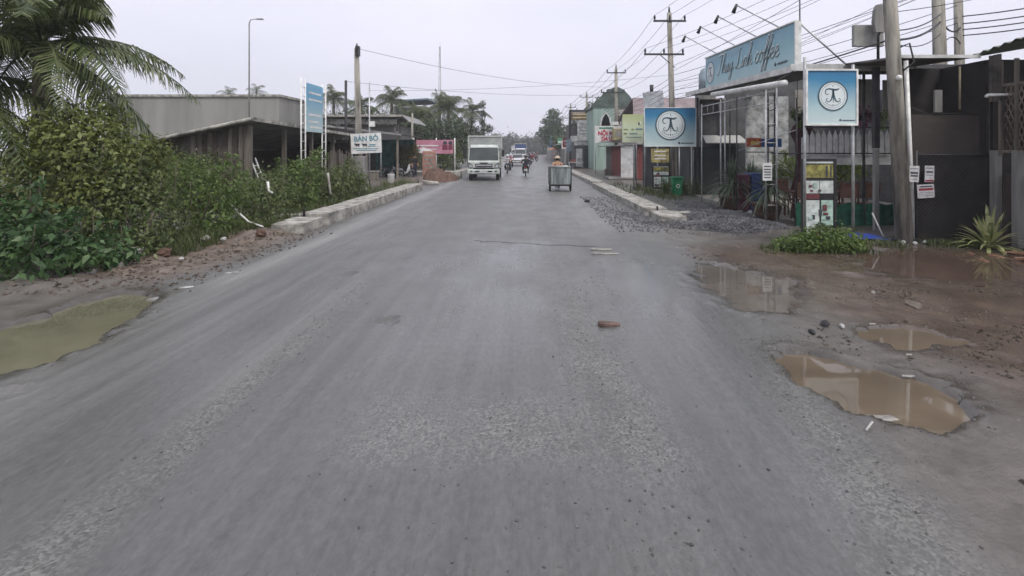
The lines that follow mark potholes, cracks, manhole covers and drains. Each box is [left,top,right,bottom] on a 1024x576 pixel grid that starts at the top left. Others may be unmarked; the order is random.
pothole [687,260,812,317]
pothole [0,288,178,380]
pothole [848,323,975,355]
pothole [763,341,995,439]
